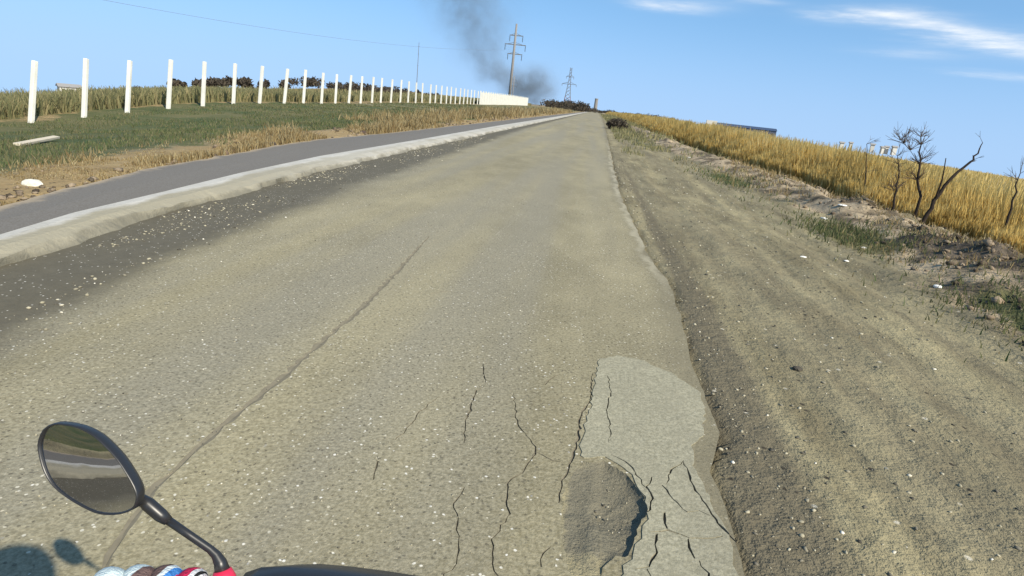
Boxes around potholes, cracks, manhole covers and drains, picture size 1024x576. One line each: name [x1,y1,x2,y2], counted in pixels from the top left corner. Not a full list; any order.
crack [491,374,611,576]
crack [443,488,464,576]
crack [463,364,486,442]
crack [102,237,449,569]
crack [630,463,736,576]
pothole [561,461,648,576]
